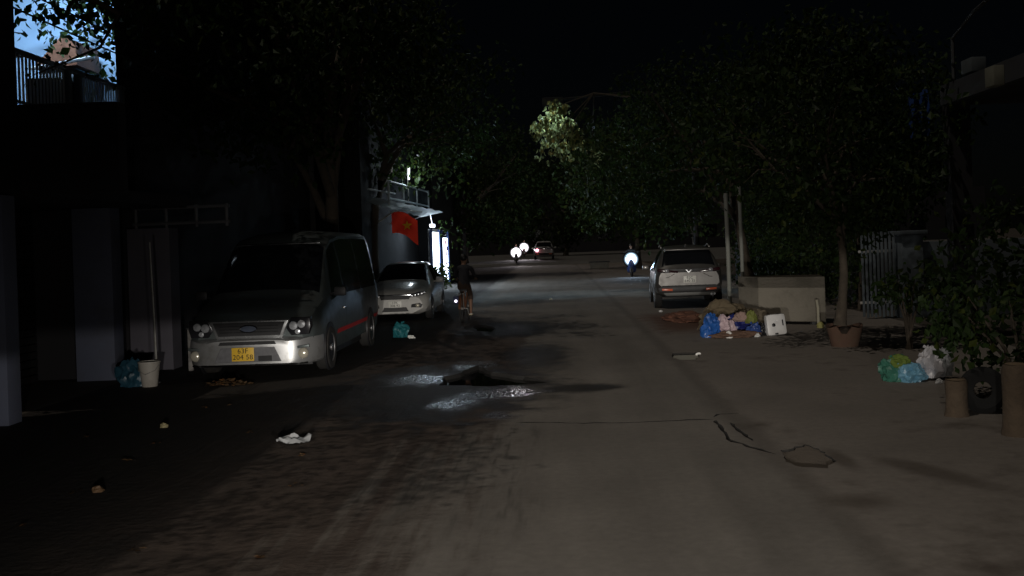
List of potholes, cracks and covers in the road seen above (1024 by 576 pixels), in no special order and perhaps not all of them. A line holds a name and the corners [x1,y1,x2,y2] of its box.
pothole [439,365,547,386]
crack [519,413,774,454]
